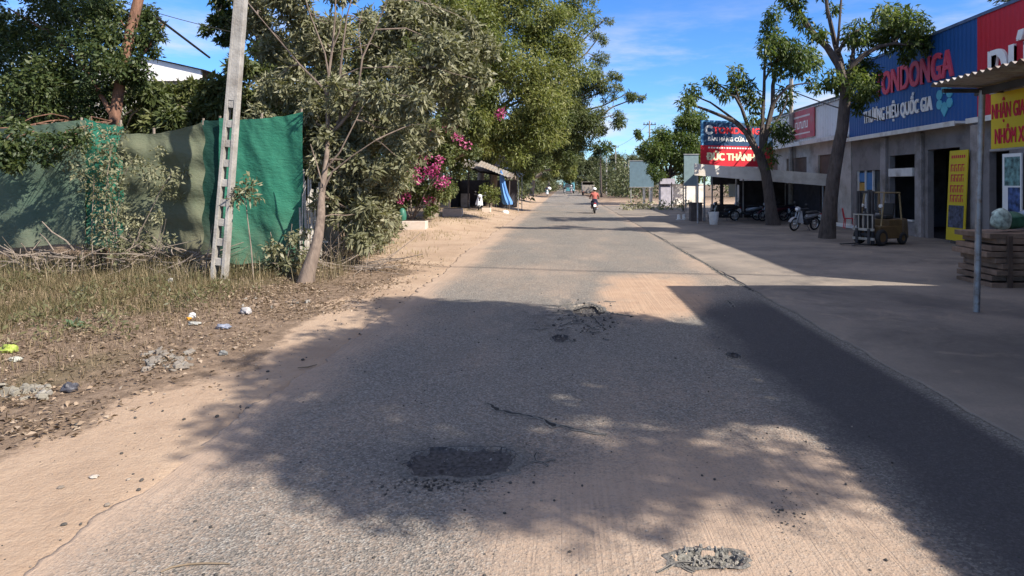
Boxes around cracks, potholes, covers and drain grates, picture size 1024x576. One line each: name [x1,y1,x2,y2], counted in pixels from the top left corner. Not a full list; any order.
pothole [390,443,532,482]
crack [483,402,607,466]
pothole [661,543,753,570]
pothole [550,334,572,343]
pothole [566,302,609,319]
